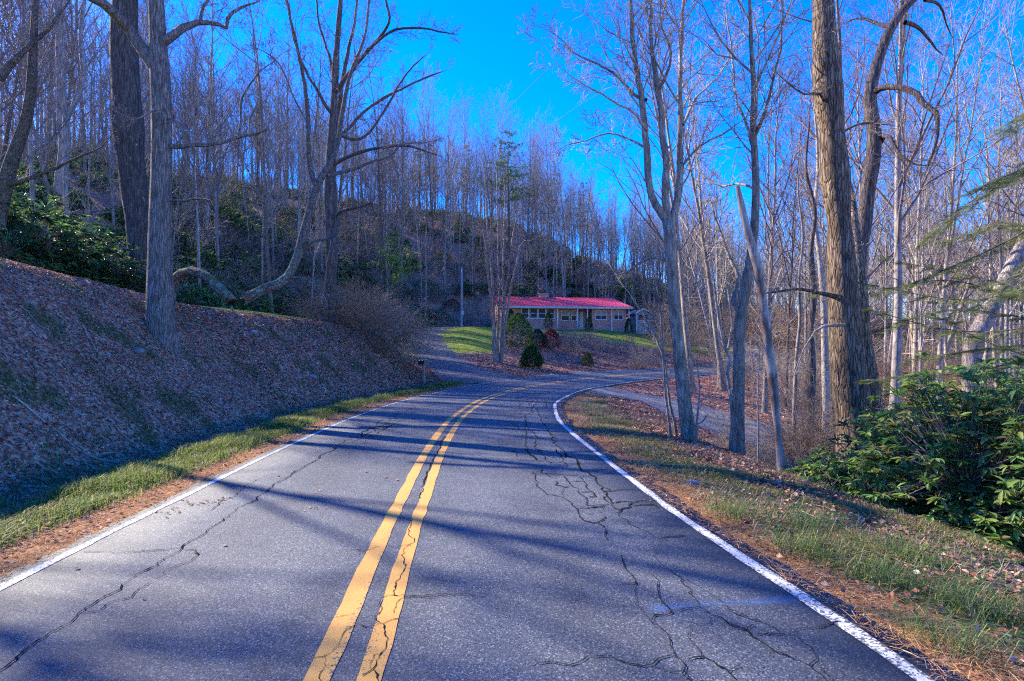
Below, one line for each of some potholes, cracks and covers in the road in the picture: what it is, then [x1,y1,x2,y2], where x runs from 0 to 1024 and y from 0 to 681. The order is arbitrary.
crack [0,406,416,670]
crack [419,436,444,497]
crack [533,549,840,681]
crack [511,398,684,540]
